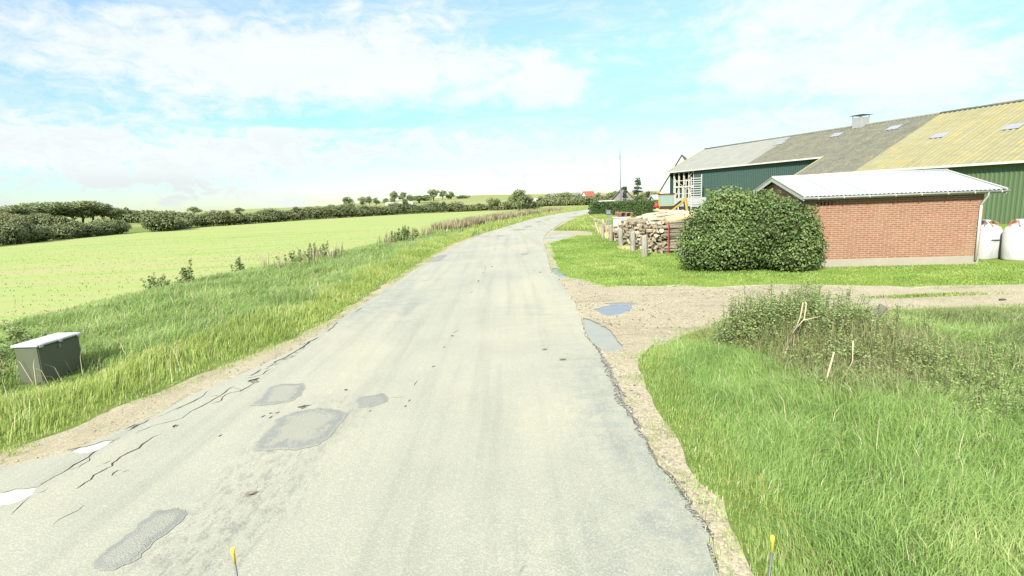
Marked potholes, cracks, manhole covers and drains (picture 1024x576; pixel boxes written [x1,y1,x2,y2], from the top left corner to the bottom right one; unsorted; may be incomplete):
pothole [0,487,37,505]
pothole [68,440,113,454]
pothole [583,318,623,352]
crack [13,308,361,513]
